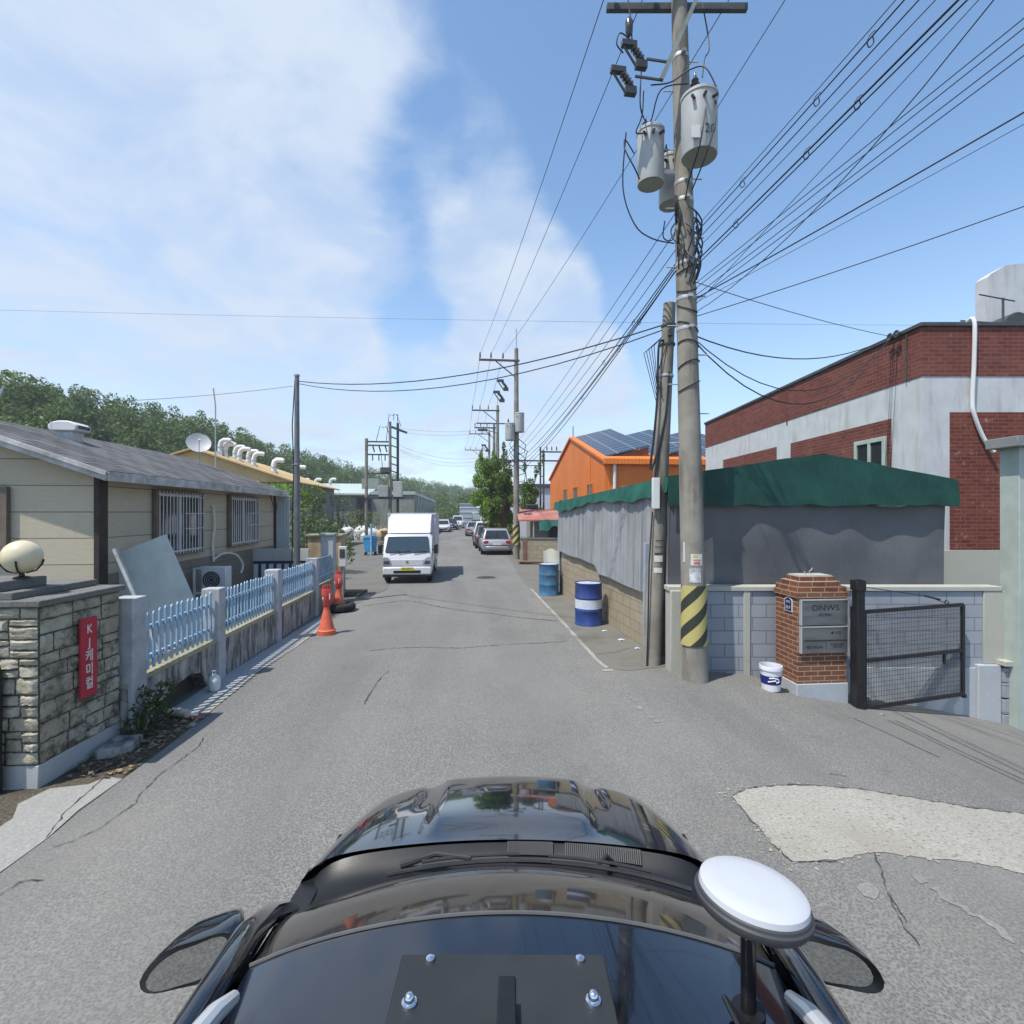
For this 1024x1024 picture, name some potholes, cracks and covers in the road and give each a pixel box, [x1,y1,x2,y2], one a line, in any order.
crack [874,853,920,945]
crack [46,738,203,847]
